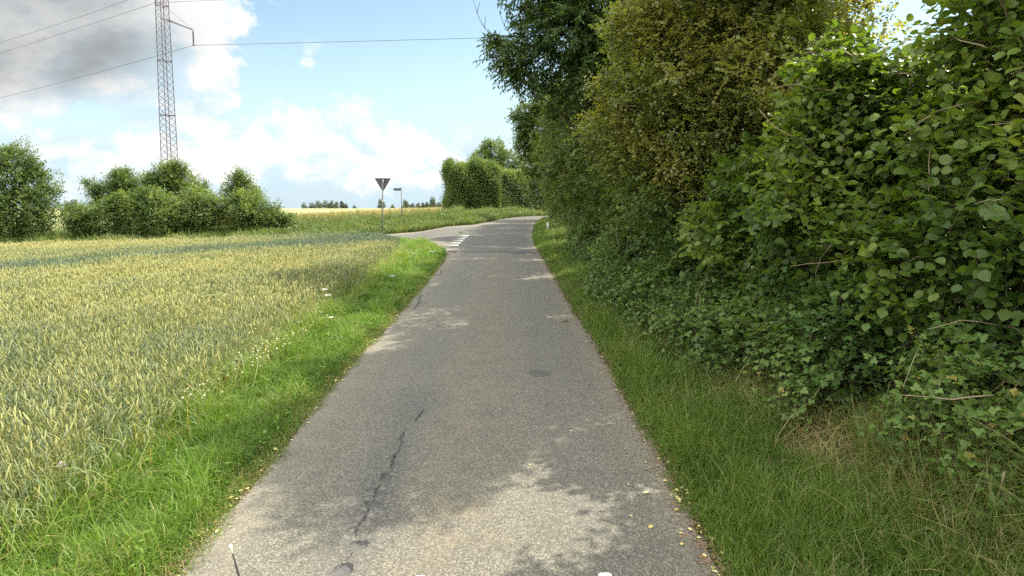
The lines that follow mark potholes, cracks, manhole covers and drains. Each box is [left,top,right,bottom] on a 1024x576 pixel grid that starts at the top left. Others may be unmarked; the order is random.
crack [345,409,425,562]
